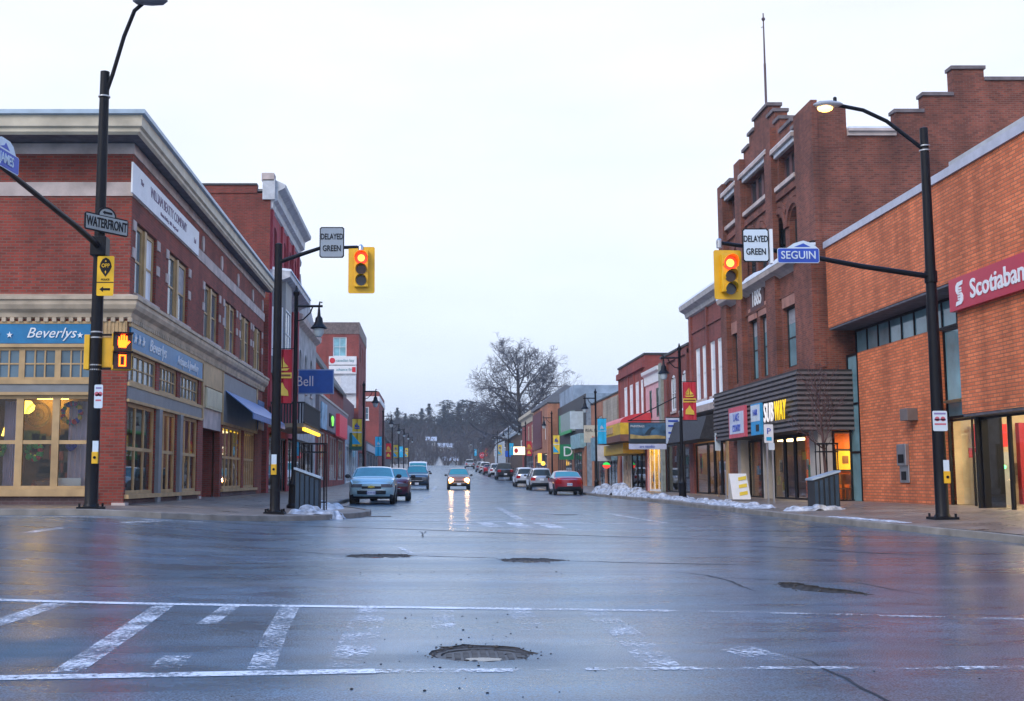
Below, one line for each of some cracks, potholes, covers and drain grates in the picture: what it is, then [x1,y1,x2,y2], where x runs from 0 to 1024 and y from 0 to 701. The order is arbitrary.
manhole cover [417,643,542,662]
pothole [770,581,873,596]
crack [792,655,890,701]
crack [681,572,932,596]
